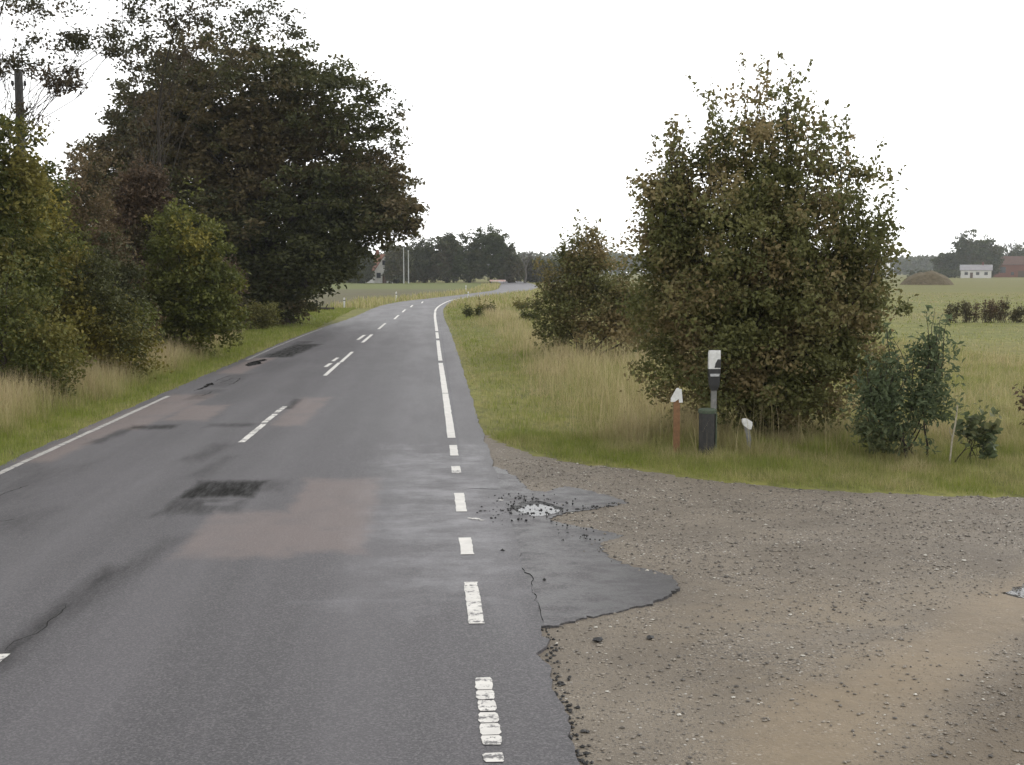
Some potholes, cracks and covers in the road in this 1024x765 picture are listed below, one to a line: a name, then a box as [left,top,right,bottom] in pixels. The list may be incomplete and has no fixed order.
pothole [514,501,564,516]
